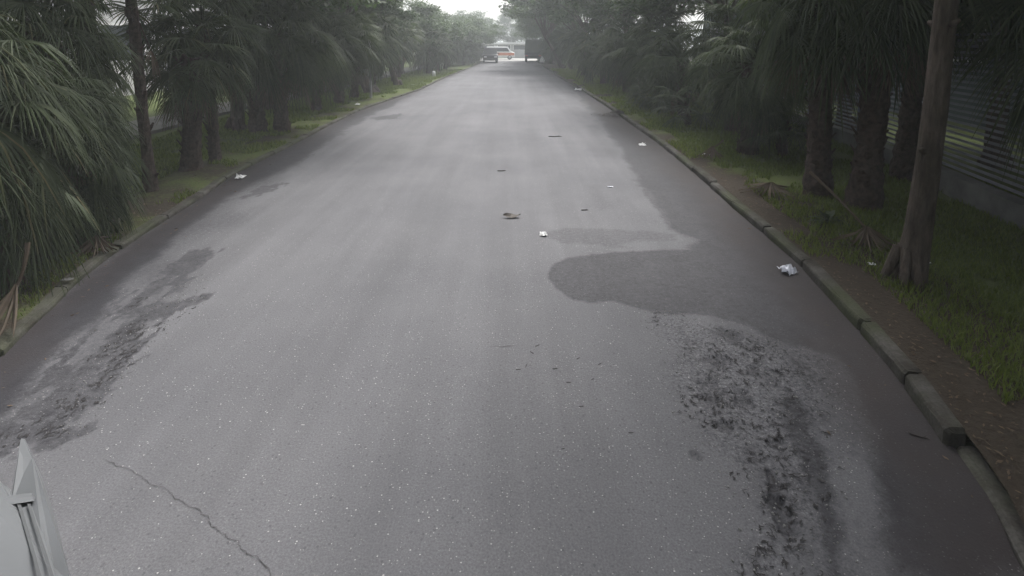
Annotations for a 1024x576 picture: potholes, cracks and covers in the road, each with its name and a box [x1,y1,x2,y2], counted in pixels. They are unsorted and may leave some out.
crack [105,459,271,576]
